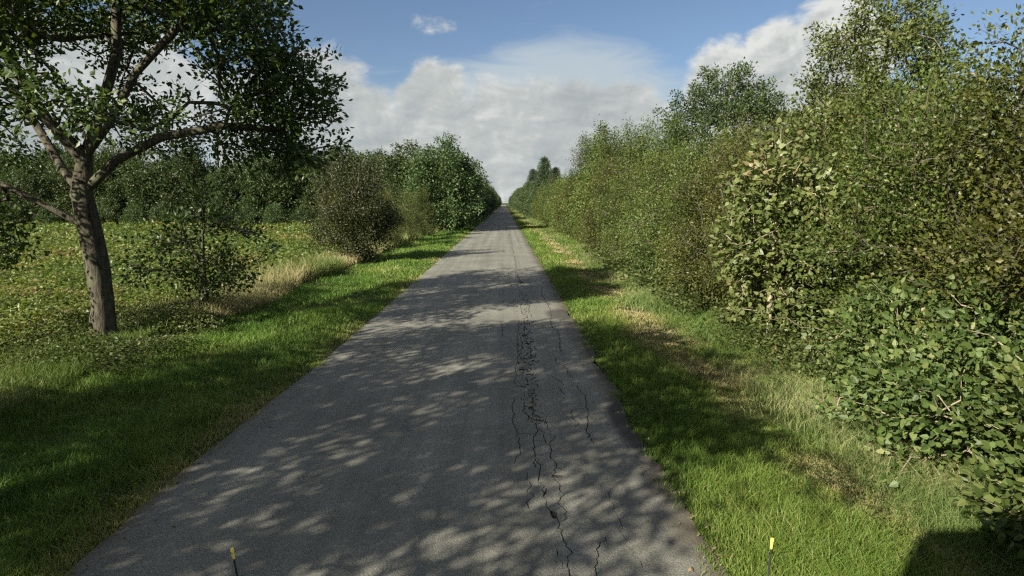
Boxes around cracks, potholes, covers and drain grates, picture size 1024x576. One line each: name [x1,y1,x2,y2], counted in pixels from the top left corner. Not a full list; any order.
crack [501,244,594,576]
